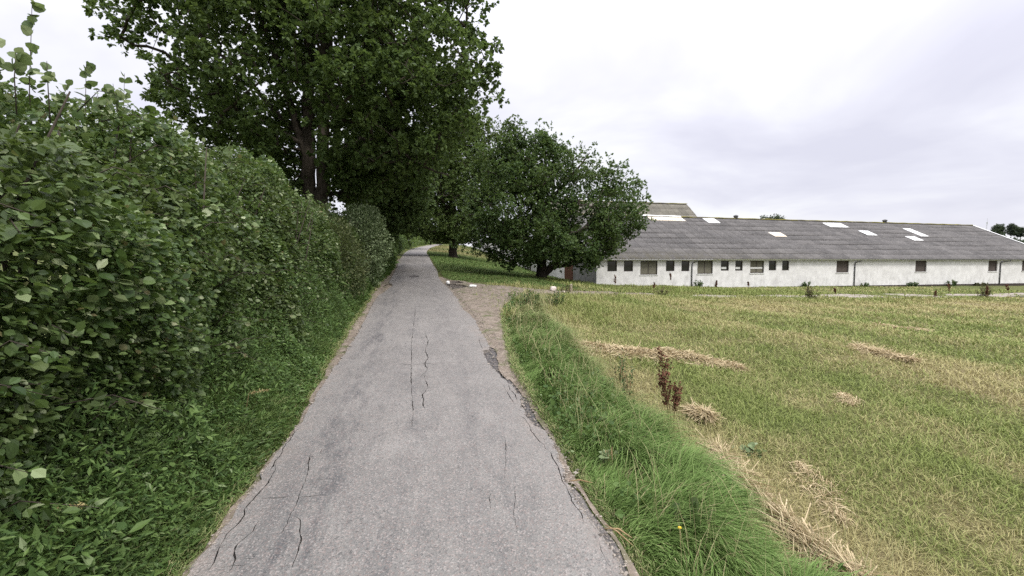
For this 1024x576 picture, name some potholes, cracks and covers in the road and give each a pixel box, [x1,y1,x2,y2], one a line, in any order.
crack [406,292,455,422]
crack [208,431,325,571]
crack [497,378,584,522]
